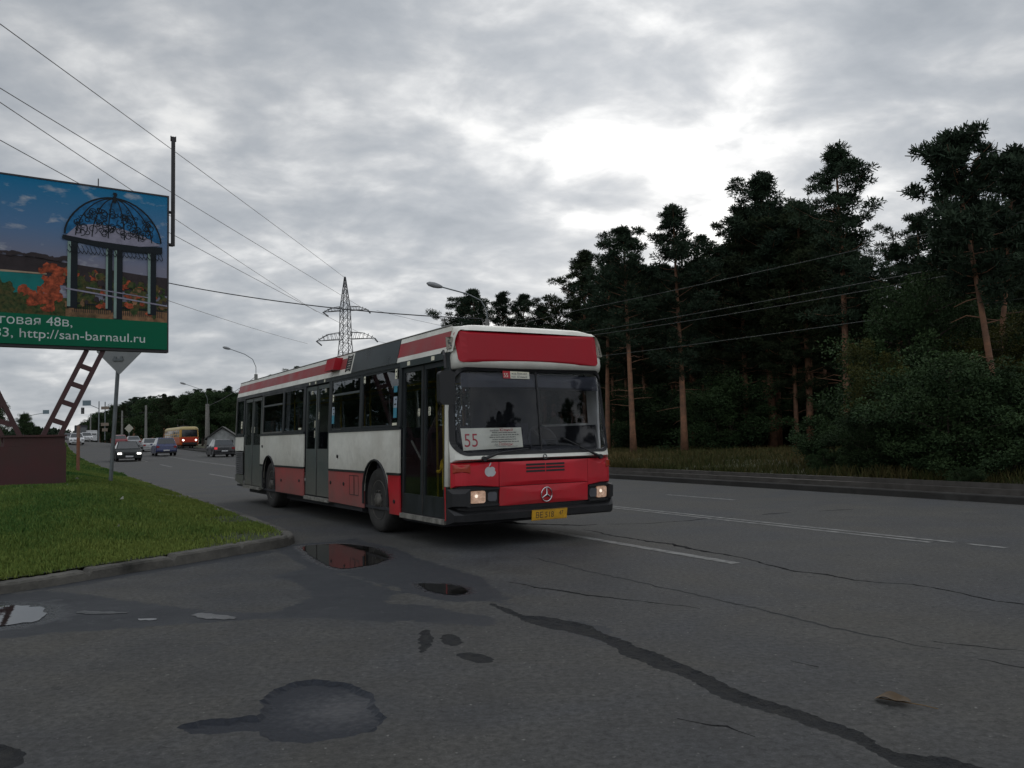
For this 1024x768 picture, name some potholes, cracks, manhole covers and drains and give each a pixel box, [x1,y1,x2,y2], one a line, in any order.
pothole [417,630,434,653]
pothole [0,744,26,768]
pothole [456,652,495,663]
pothole [177,679,387,744]
pothole [440,634,464,646]
crack [489,517,1024,768]
